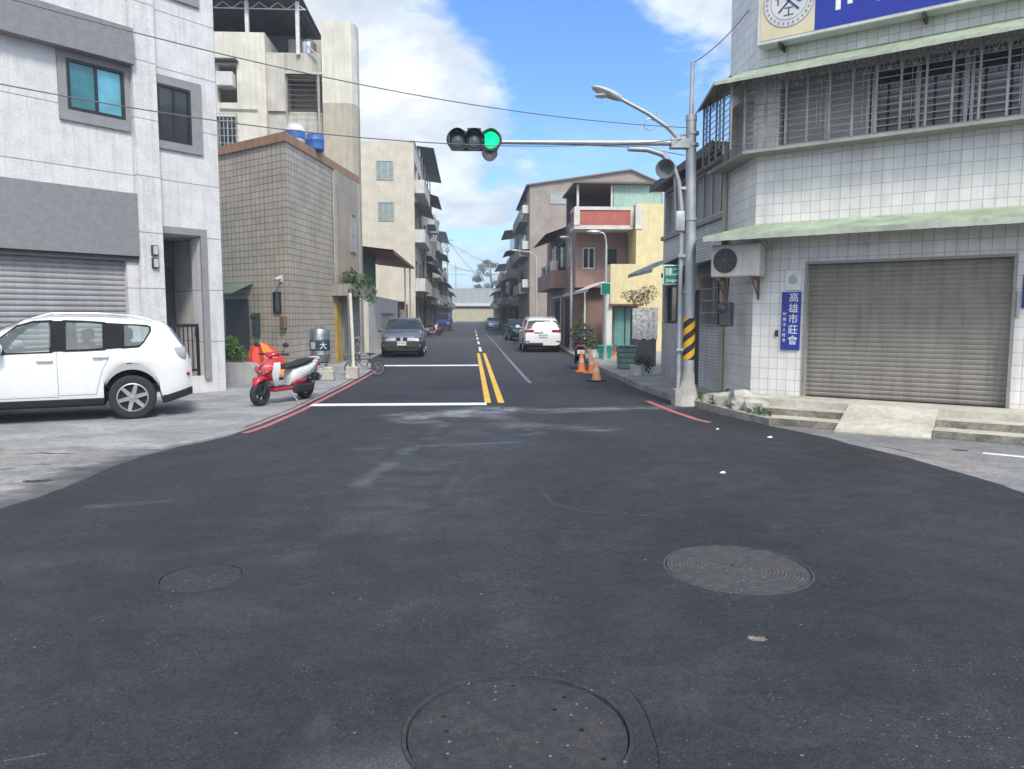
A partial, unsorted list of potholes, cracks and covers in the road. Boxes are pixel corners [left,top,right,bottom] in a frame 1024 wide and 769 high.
manhole cover [663,545,815,595]
manhole cover [401,674,635,769]
manhole cover [155,563,246,592]
crack [632,693,660,769]
